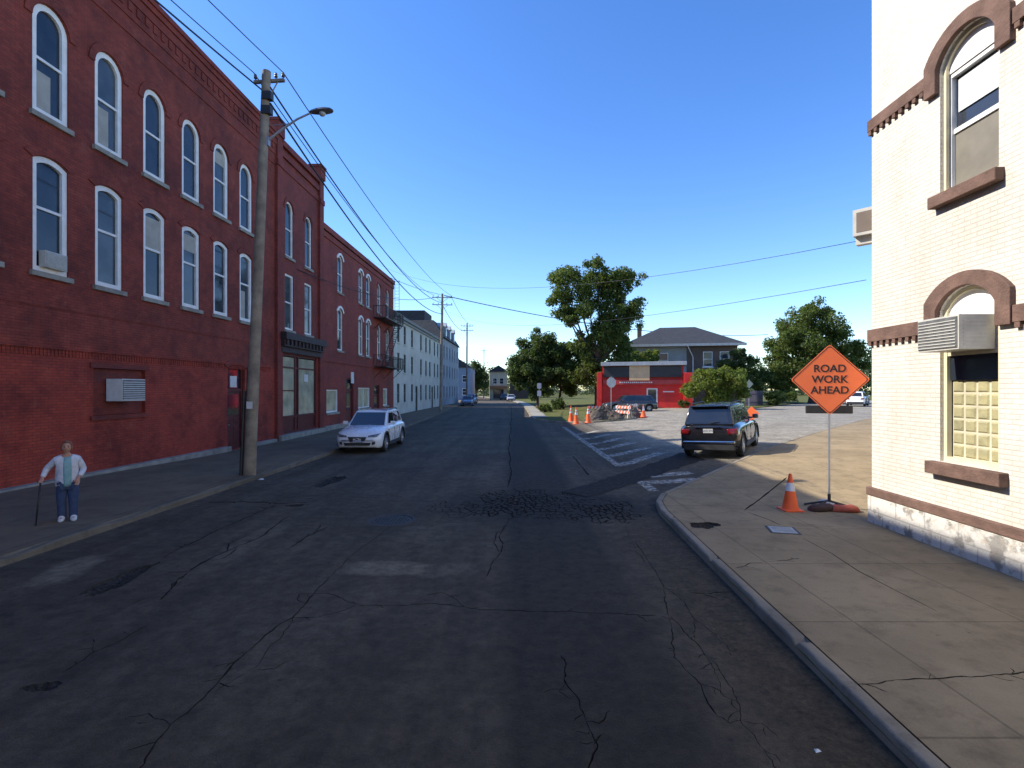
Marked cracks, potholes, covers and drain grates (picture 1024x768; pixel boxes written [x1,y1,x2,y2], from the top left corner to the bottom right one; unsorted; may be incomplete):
crack [857,668,1024,692]
pothole [314,476,347,488]
pothole [79,562,160,597]
utility cover [765,526,802,535]
crack [126,528,388,768]
crack [360,531,781,768]
manhole cover [368,514,416,526]
crack [135,500,325,603]
pothole [19,681,63,692]
